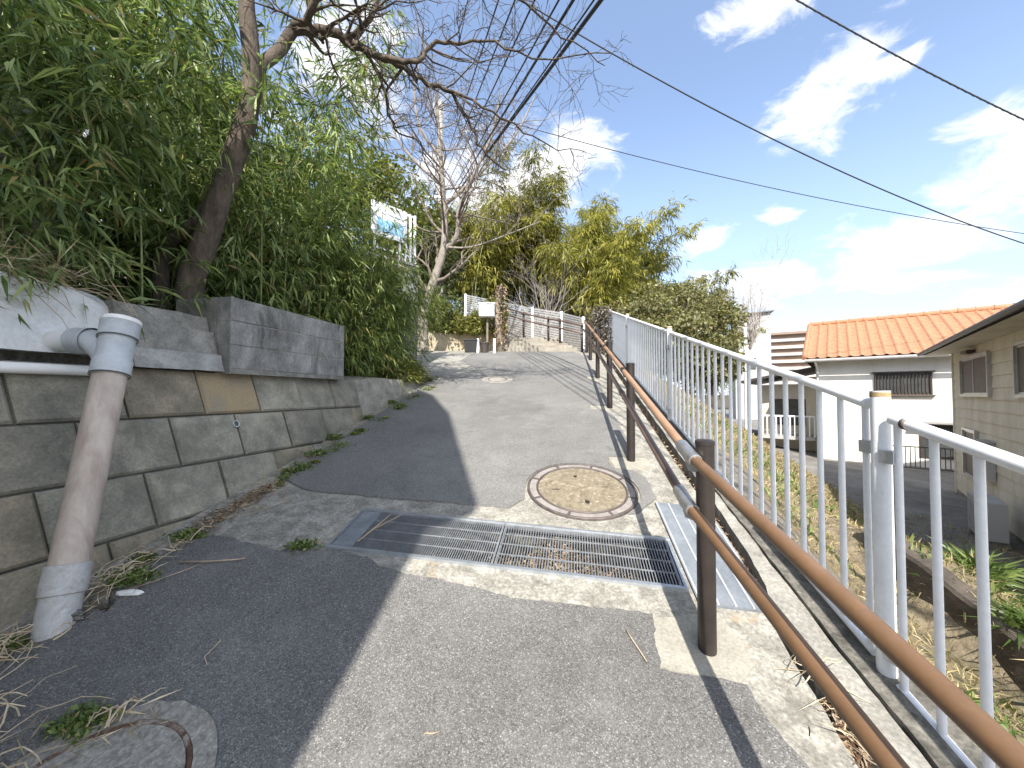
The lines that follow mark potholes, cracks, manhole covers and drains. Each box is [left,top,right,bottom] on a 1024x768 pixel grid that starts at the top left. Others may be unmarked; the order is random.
manhole cover [527,463,638,521]
drain grate [332,510,505,564]
drain grate [494,524,683,586]
